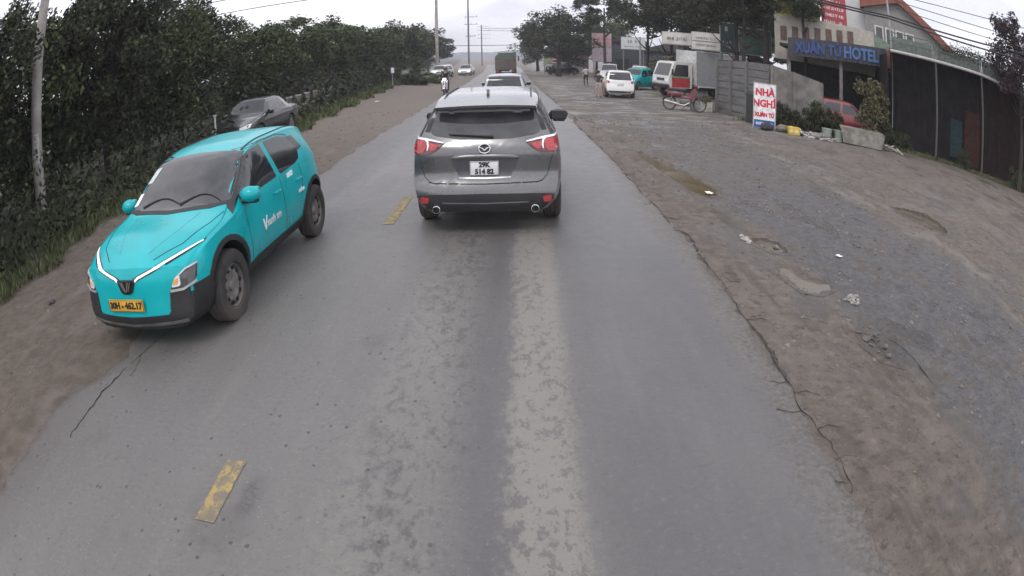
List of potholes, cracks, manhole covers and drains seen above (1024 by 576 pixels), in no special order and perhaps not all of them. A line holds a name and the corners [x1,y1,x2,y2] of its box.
pothole [749,237,791,255]
crack [70,328,174,437]
crack [577,125,852,485]
pothole [888,206,950,235]
pothole [633,151,722,198]
